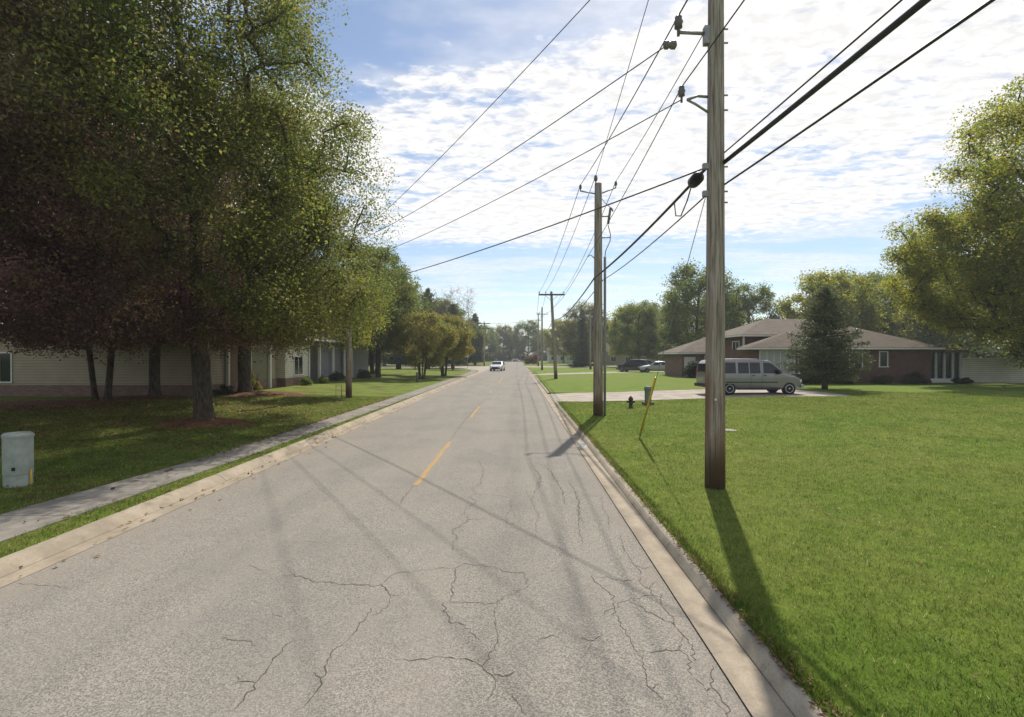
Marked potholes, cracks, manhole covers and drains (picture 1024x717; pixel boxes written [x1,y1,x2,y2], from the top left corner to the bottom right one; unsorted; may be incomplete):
crack [286,460,528,717]
crack [532,463,731,715]
crack [224,637,290,713]
